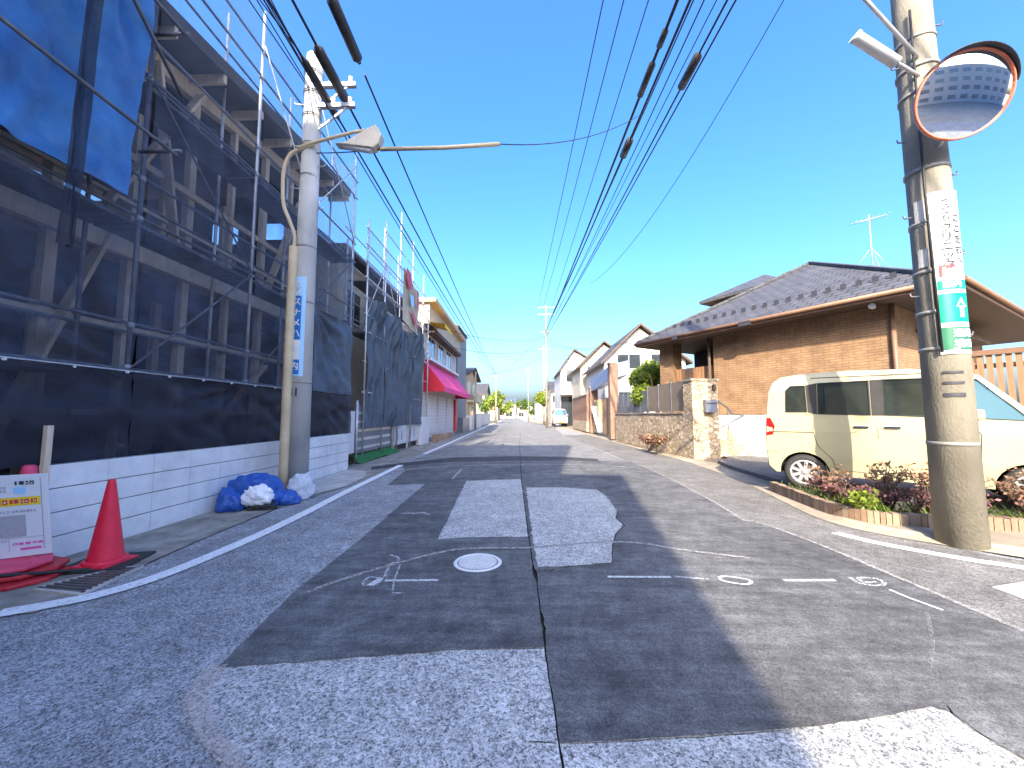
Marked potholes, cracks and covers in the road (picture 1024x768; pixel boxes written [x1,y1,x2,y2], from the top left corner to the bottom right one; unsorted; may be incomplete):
drain grate [31,565,144,596]
manhole cover [453,553,502,572]
